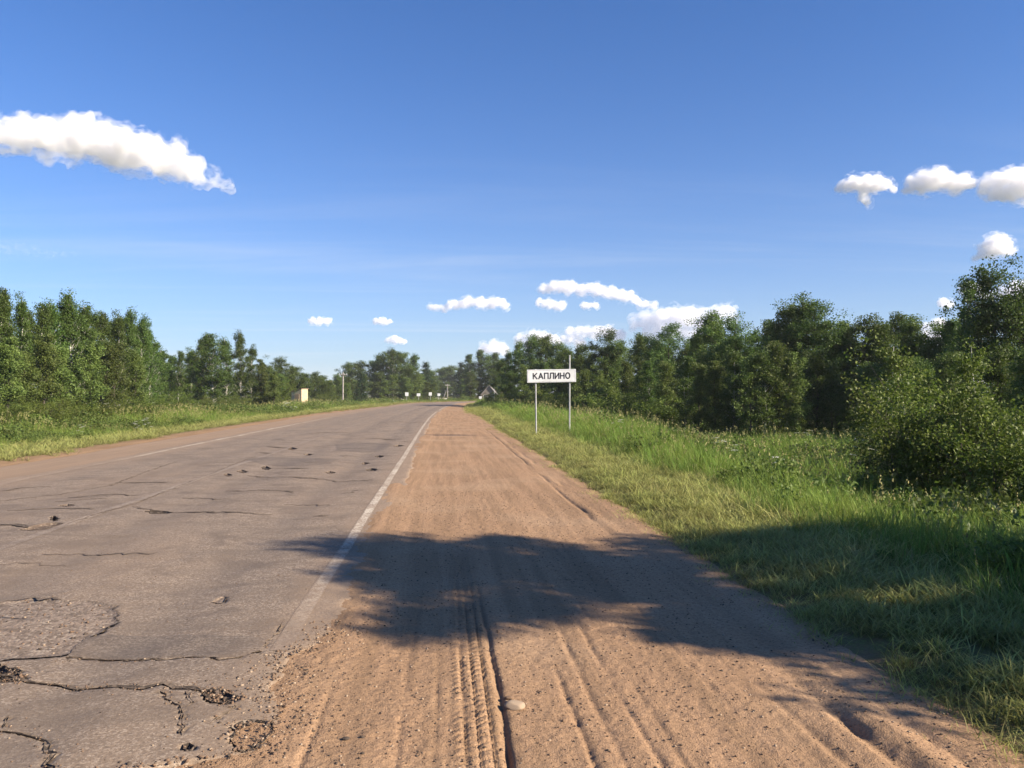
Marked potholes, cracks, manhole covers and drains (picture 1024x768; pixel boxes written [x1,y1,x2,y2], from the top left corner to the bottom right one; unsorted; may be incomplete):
pothole [200,688,238,705]
crack [1,552,152,566]
crack [0,715,57,768]
crack [0,462,175,527]
crack [233,462,360,516]
pothole [0,663,26,683]
crack [0,622,283,734]
crack [197,498,272,515]
pothole [230,719,274,752]
